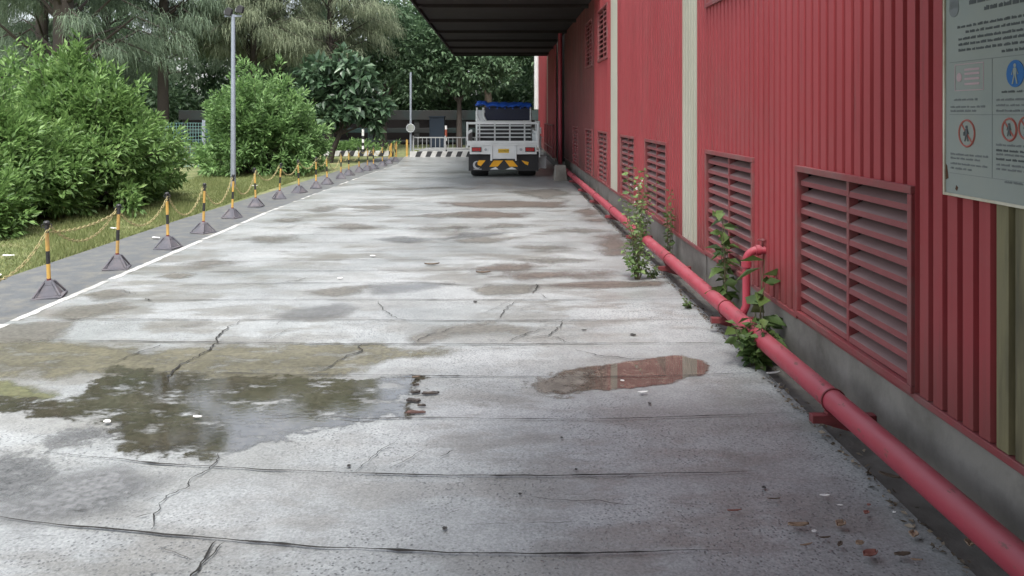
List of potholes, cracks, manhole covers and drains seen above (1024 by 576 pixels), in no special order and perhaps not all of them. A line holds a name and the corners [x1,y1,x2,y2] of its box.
crack [486,301,629,376]
crack [158,541,225,576]
crack [137,453,219,527]
crack [117,321,239,382]
